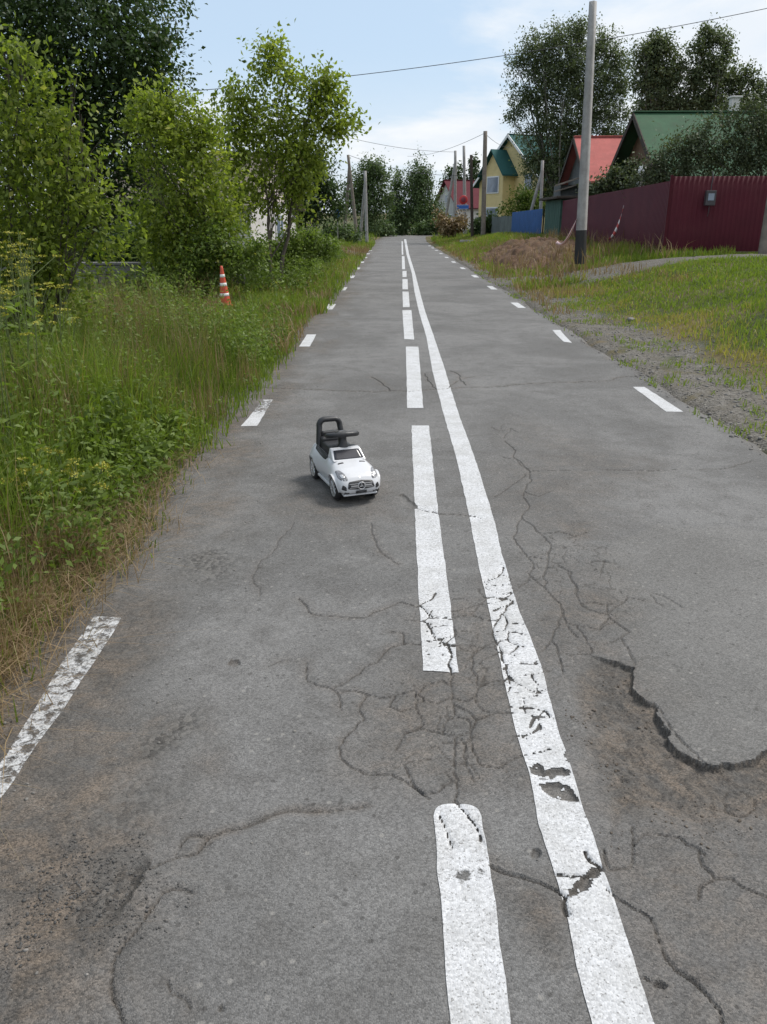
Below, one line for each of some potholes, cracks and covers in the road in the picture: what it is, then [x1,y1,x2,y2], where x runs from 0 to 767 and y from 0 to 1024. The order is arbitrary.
pothole [530,764,571,780]
crack [250,424,751,849]
pothole [539,782,579,802]
crack [488,831,767,1024]
crack [106,804,368,1024]
